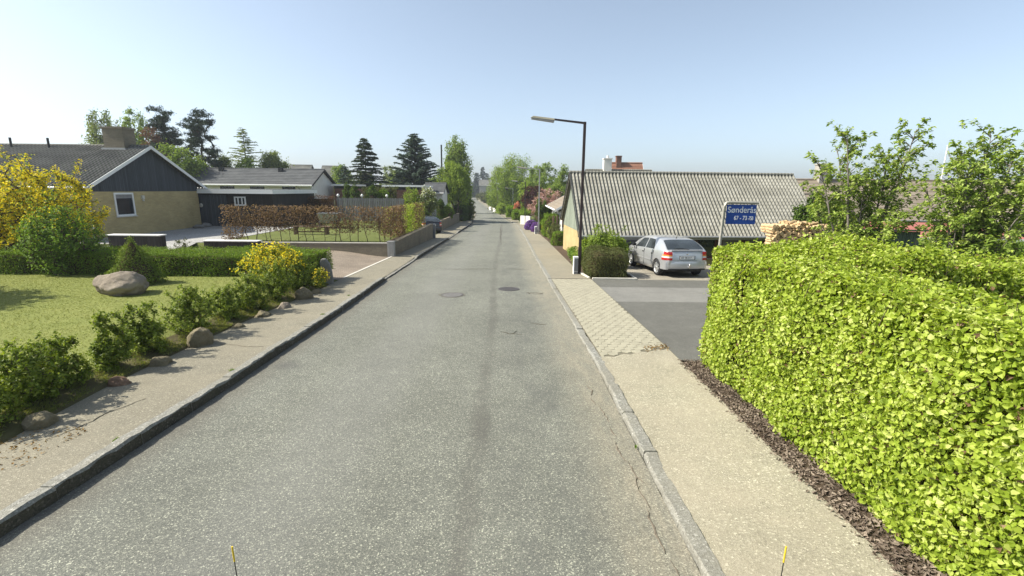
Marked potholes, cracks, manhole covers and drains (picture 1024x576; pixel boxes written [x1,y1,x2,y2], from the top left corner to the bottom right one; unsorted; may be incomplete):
crack [587,386,679,576]
